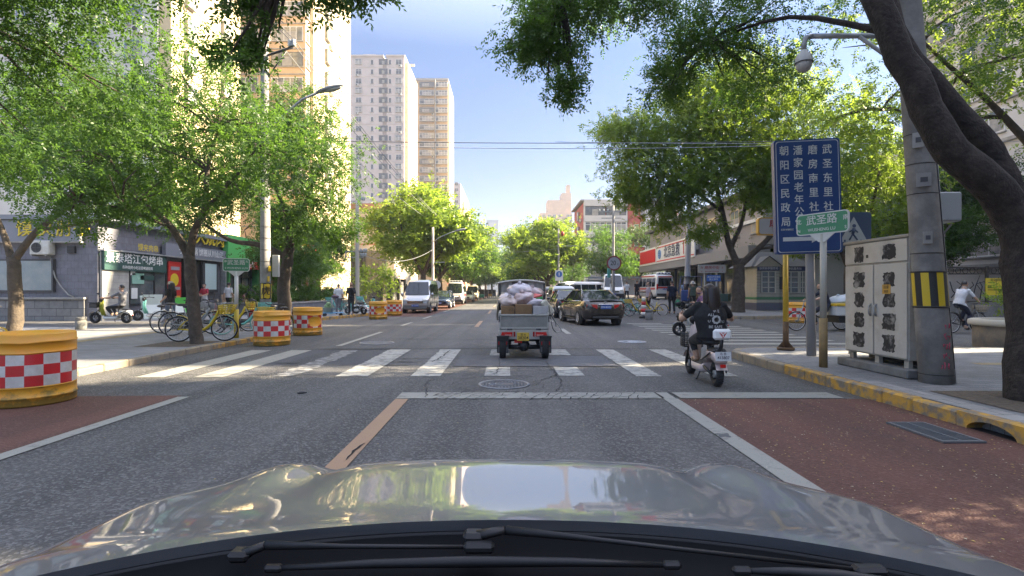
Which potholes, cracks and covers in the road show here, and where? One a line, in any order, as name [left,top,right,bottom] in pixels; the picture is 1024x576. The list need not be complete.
crack [393,351,653,400]
drain grate [886,422,987,443]
manhole cover [478,379,530,389]
